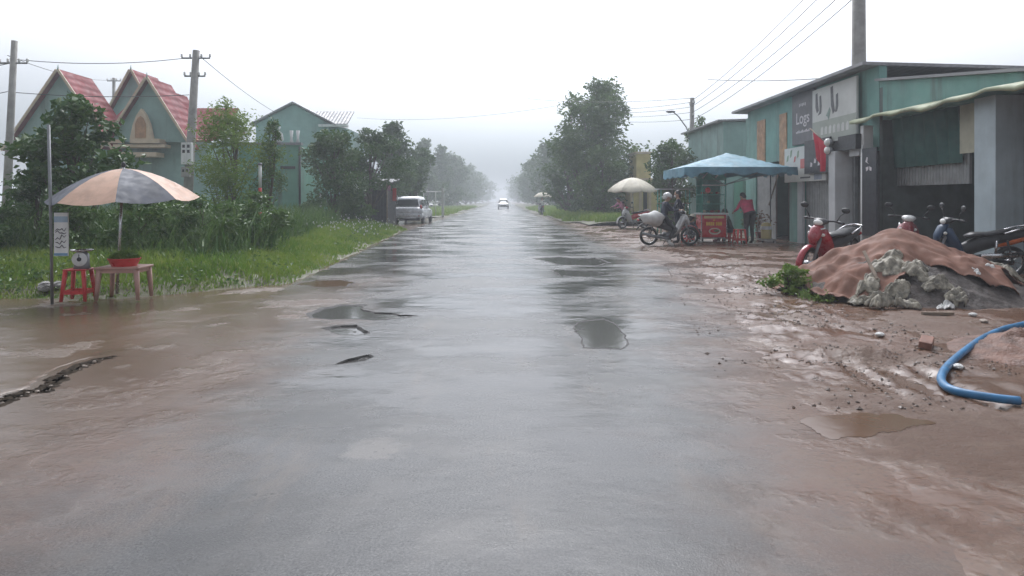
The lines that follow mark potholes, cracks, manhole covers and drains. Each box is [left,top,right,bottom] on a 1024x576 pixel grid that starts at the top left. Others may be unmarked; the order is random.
crack [0,355,118,407]
pothole [334,354,375,365]
pothole [306,304,418,320]
pothole [572,318,630,349]
pothole [322,324,370,336]
